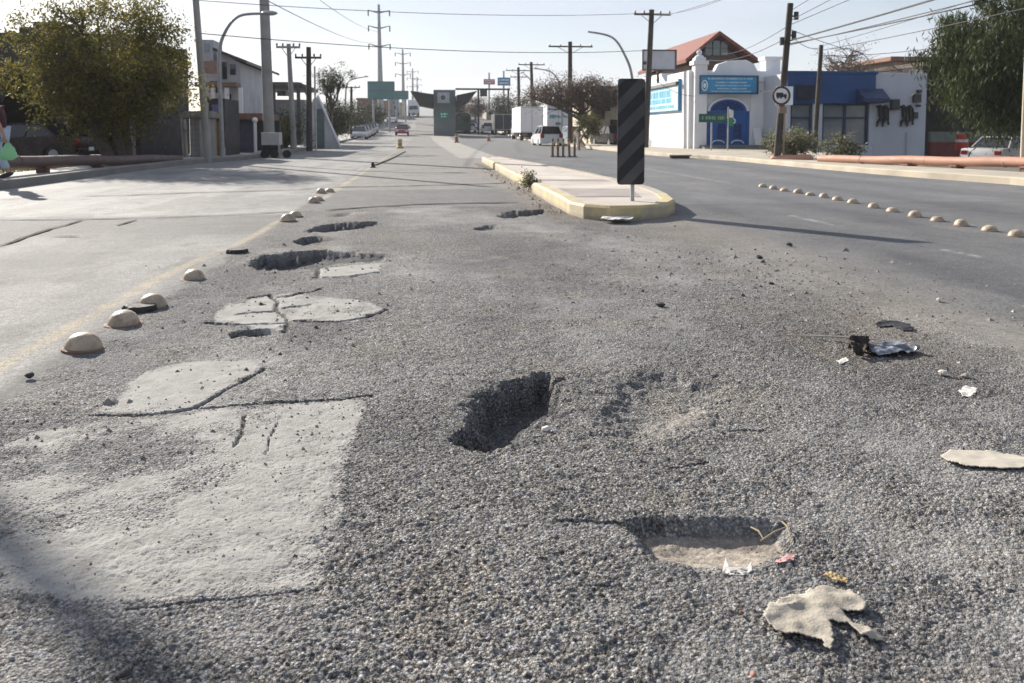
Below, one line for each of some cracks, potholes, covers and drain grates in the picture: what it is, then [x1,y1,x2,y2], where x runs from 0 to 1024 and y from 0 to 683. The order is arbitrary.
pothole [302,221,384,233]
pothole [245,249,397,271]
pothole [497,209,548,219]
pothole [575,365,748,455]
pothole [289,235,343,247]
crack [92,367,376,455]
pothole [227,328,278,339]
pothole [624,513,802,578]
pothole [448,371,571,455]
